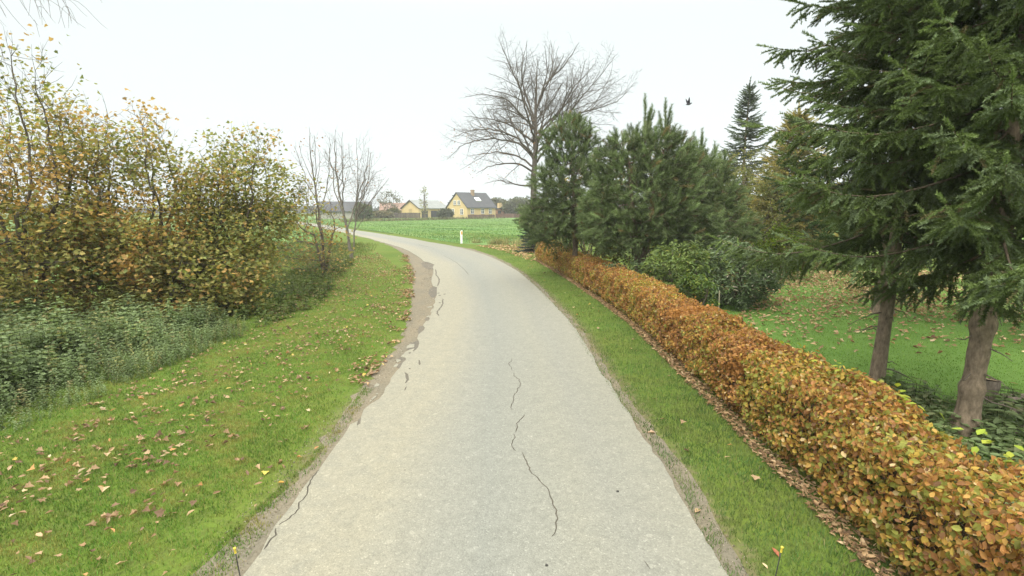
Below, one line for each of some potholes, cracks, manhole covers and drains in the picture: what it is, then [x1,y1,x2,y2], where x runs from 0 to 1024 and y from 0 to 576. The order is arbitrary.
crack [264,470,319,549]
crack [508,359,558,536]
